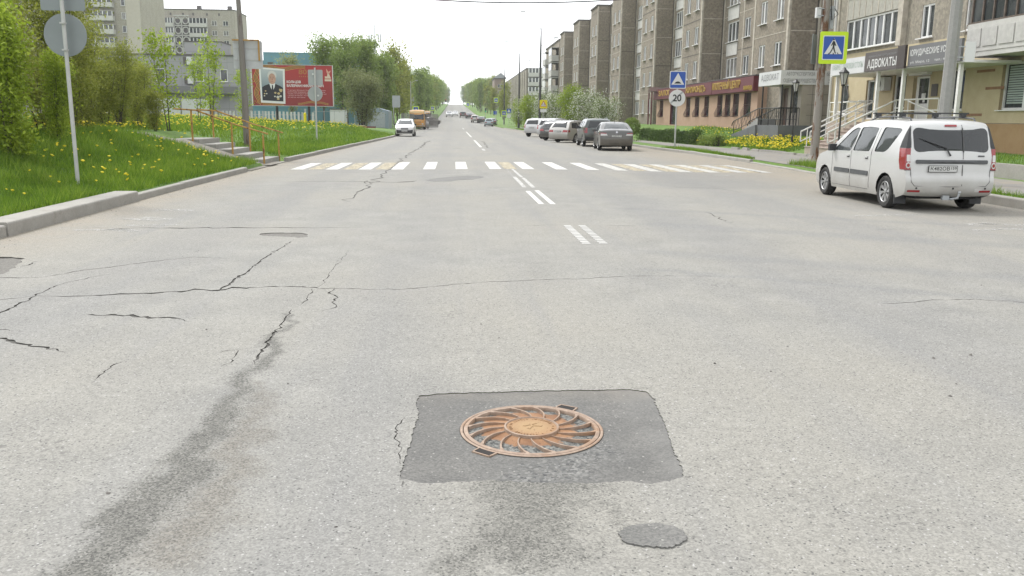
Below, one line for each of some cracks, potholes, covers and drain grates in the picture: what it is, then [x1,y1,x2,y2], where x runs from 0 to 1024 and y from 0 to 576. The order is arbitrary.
crack [303,141,429,201]
crack [0,329,63,352]
crack [0,241,670,313]
crack [220,309,292,366]
manhole cover [460,404,604,458]
